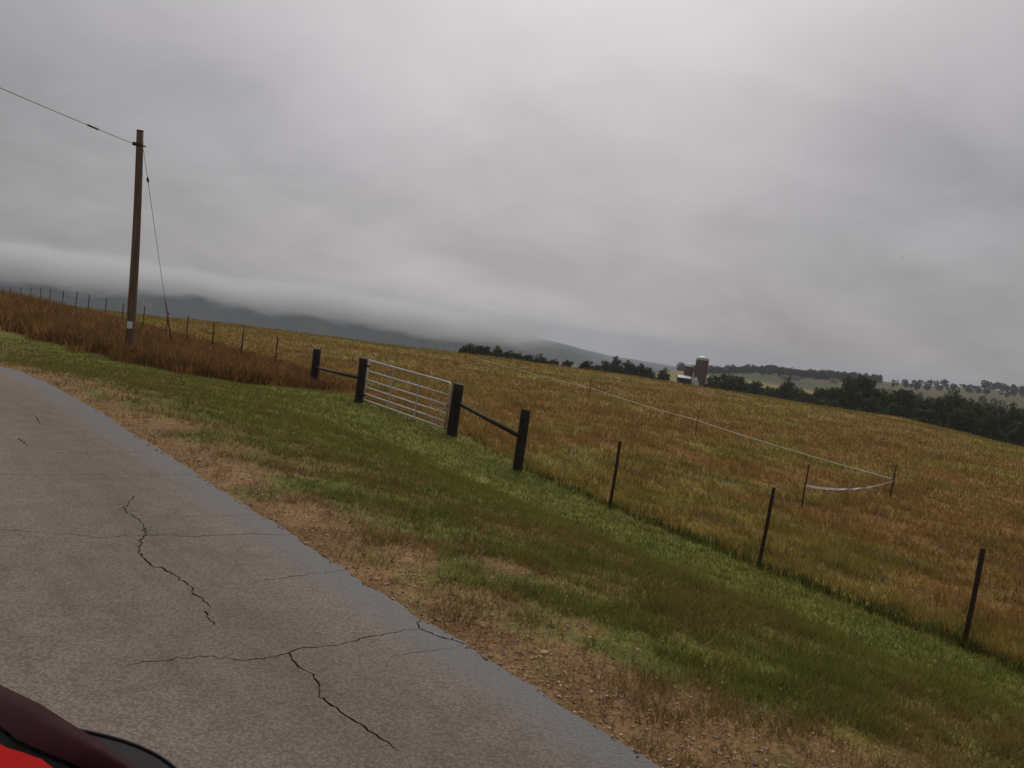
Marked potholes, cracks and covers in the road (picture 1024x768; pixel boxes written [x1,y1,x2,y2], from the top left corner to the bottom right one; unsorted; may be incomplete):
crack [129,620,458,751]
crack [9,497,272,625]
